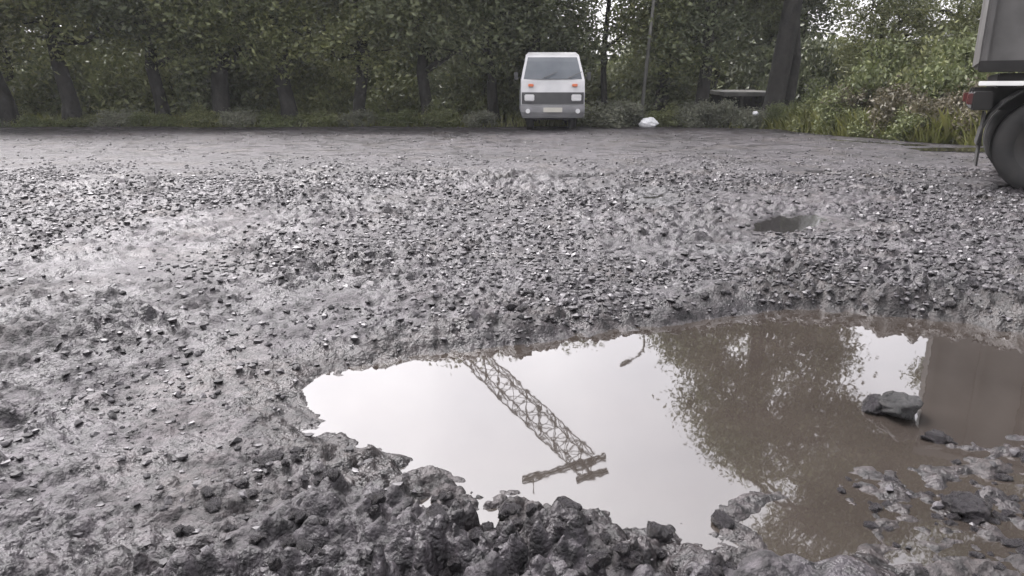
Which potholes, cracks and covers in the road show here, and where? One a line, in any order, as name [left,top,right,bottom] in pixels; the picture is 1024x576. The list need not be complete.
pothole [240,272,1024,576]
pothole [745,211,834,234]
